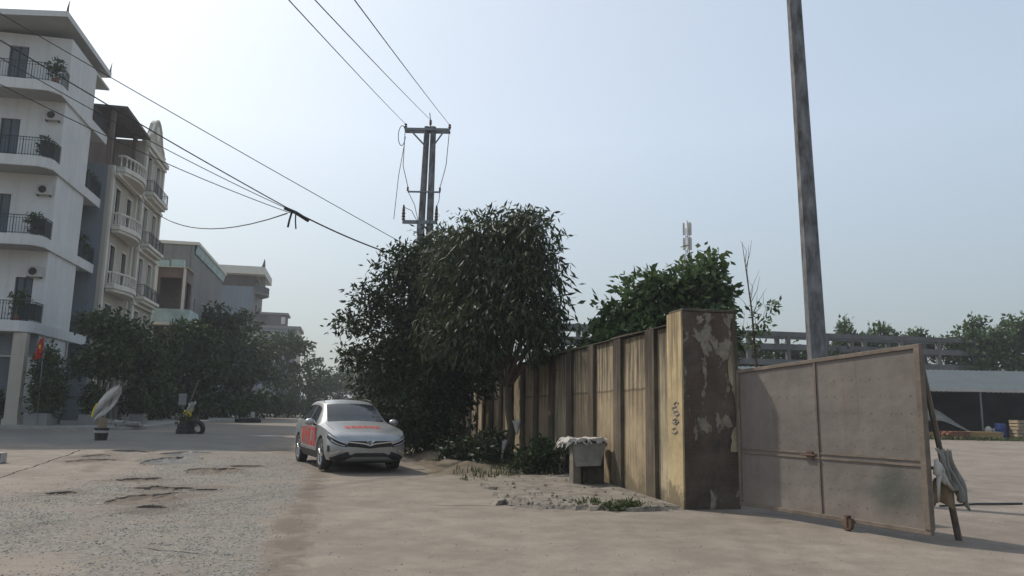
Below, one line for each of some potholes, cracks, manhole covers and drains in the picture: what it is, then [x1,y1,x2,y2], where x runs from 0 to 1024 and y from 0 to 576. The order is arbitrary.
crack [0,447,113,478]
pothole [96,490,186,506]
pothole [140,456,205,465]
